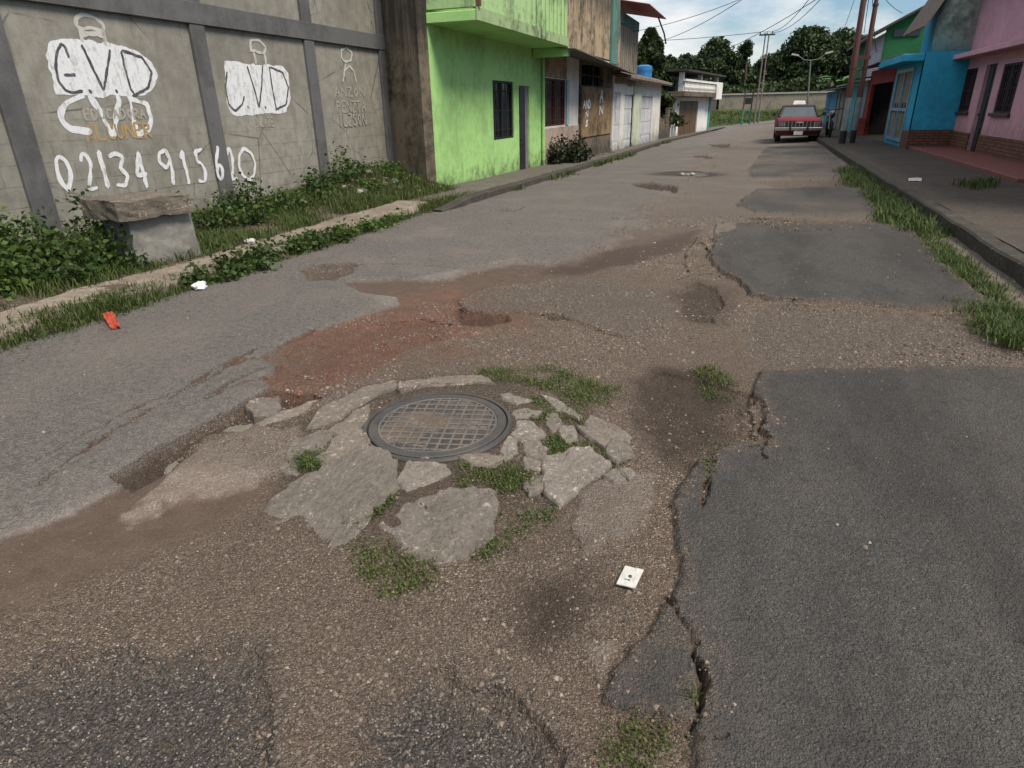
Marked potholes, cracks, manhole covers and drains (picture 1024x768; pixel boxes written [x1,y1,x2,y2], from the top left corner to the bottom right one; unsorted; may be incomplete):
manhole cover [363,392,513,463]
pothole [298,262,361,281]
pothole [631,181,679,193]
pothole [677,282,725,324]
crack [661,595,731,741]
crack [697,453,718,508]
pothole [451,305,511,327]
pothole [108,389,322,493]
crack [748,390,772,460]
